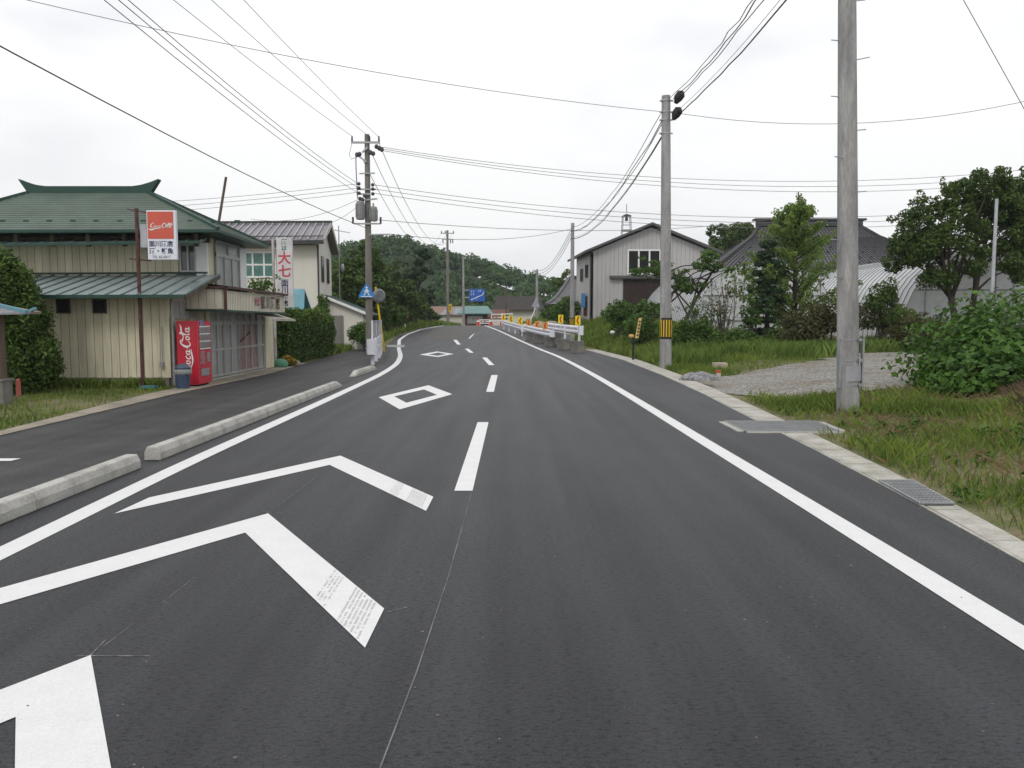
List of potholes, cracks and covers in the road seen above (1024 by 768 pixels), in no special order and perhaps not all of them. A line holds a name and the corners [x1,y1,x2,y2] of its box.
drain grate [878,479,956,505]
